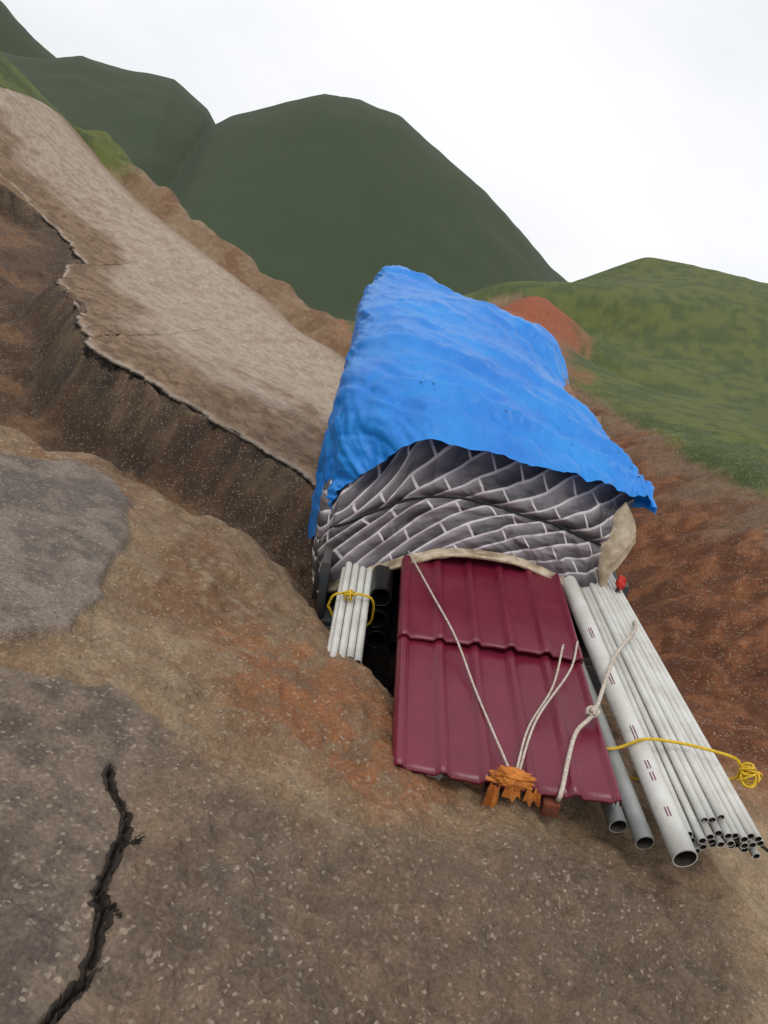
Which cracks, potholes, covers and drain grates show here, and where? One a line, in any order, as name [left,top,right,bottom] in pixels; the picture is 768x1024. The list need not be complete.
crack [43,764,145,1024]
